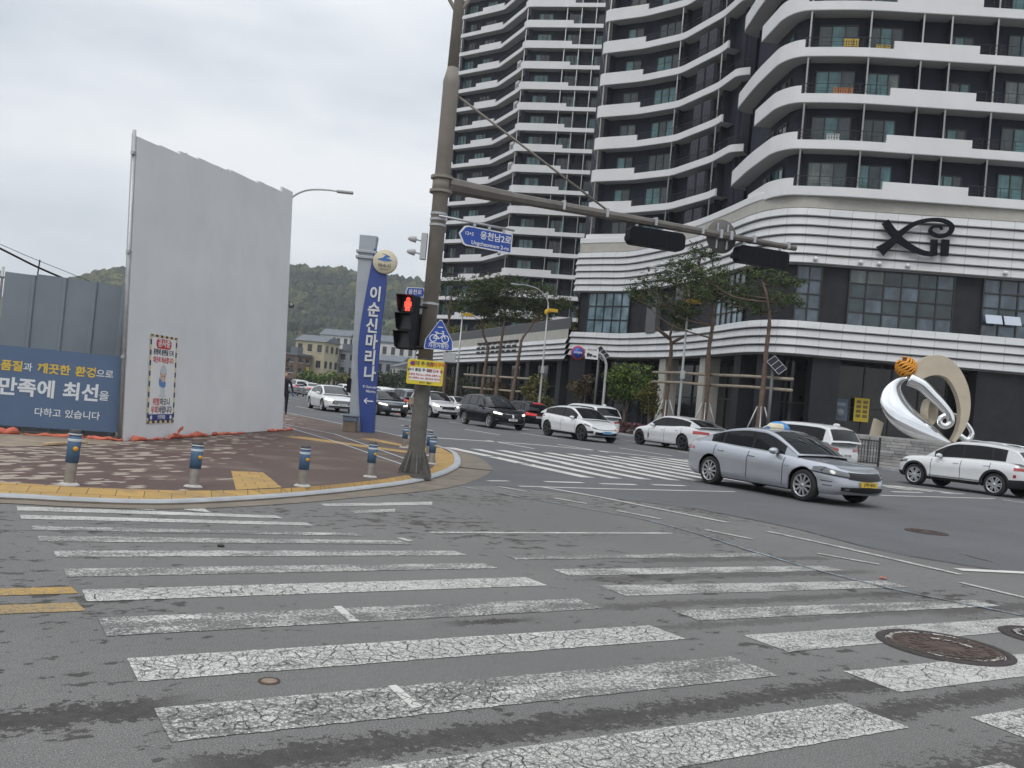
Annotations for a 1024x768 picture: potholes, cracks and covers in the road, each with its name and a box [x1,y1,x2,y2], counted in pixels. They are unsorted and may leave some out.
manhole cover [875,629,1018,667]
manhole cover [998,625,1024,641]
manhole cover [258,677,280,685]
